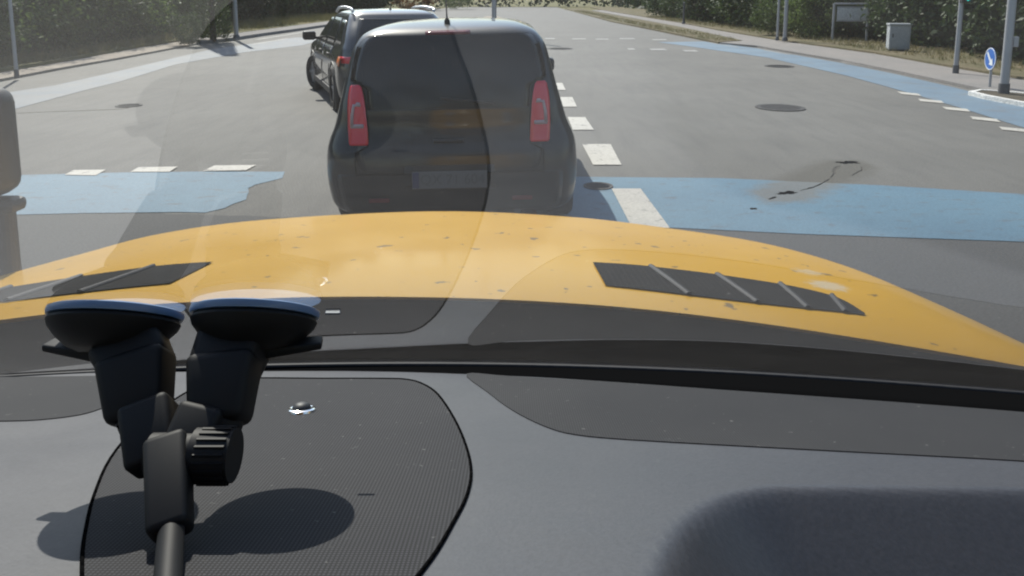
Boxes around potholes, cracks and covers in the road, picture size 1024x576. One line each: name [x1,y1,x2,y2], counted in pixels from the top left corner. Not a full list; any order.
manhole cover [583,182,613,190]
crack [771,166,863,199]
